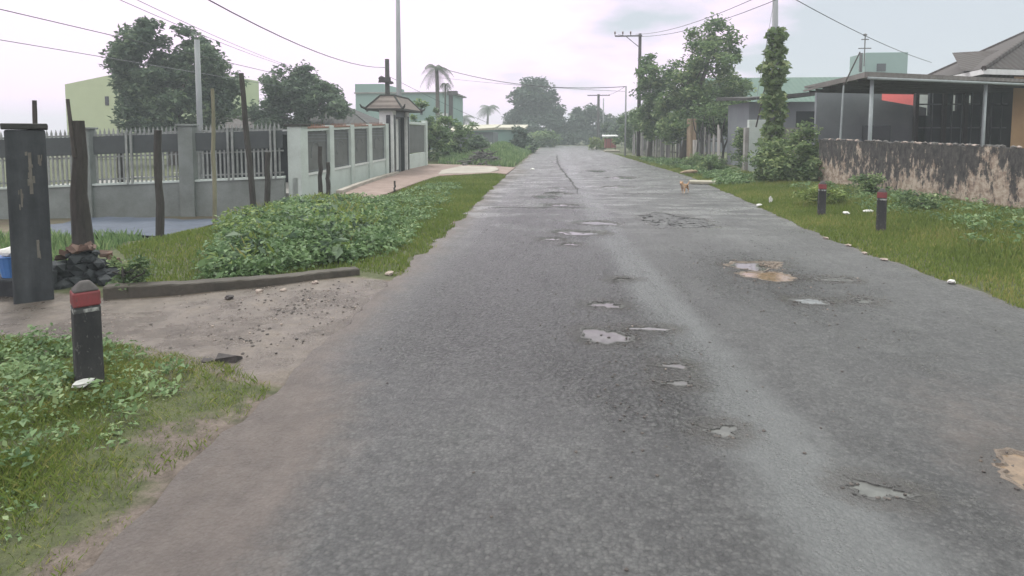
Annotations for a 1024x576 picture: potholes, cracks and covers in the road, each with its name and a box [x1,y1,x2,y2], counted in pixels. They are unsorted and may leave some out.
pothole [723,259,789,272]
pothole [979,447,1024,490]
pothole [788,297,835,305]
pothole [655,361,693,370]
crack [491,156,578,208]
pothole [585,301,626,309]
pothole [660,379,695,387]
pothole [702,423,741,439]
pothole [840,475,923,503]
pothole [734,270,800,282]
pothole [580,326,635,345]
